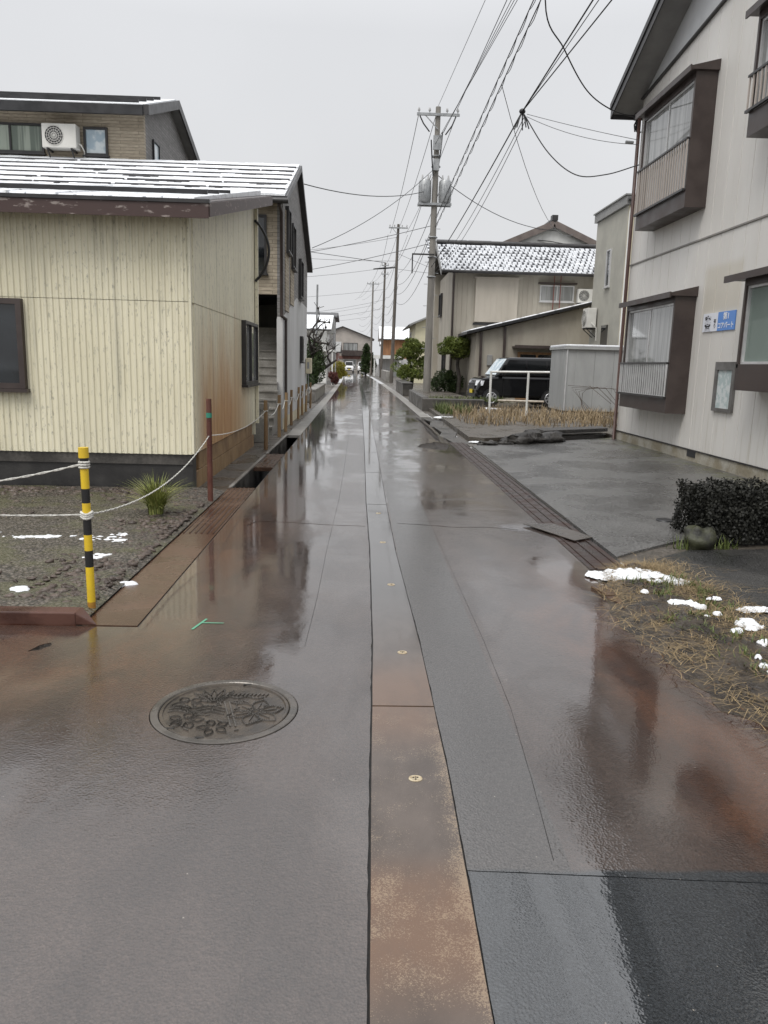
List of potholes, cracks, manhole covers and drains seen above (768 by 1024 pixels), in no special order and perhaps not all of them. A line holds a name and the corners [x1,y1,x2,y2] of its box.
manhole cover [150,680,298,745]
